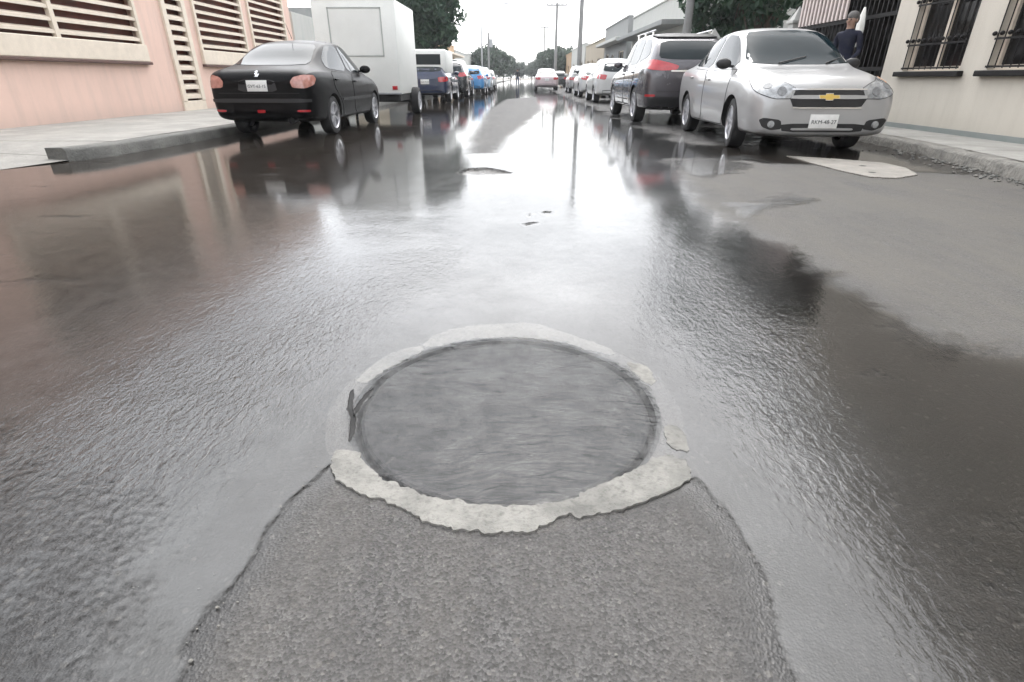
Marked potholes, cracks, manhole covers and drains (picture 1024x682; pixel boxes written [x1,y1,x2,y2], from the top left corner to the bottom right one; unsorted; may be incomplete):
pothole [455,167,517,176]
manhole cover [325,322,691,536]
